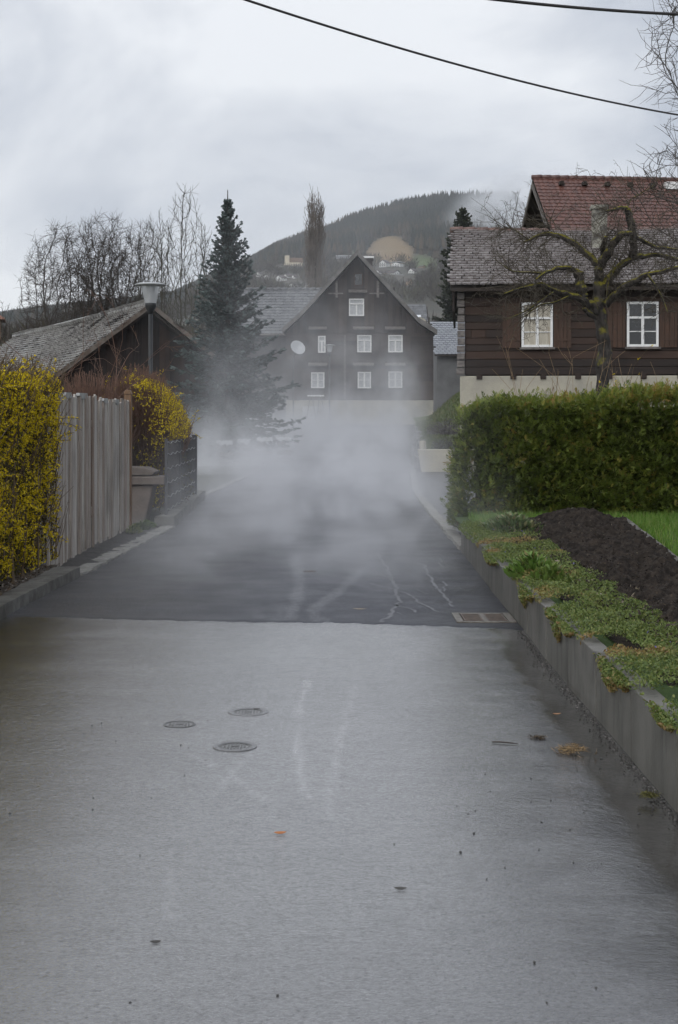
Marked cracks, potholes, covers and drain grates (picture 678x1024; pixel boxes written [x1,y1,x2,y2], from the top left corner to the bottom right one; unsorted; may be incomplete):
manhole cover [163,720,196,728]
manhole cover [228,707,269,716]
crack [370,554,454,622]
manhole cover [213,741,257,752]
drain grate [452,613,517,623]
